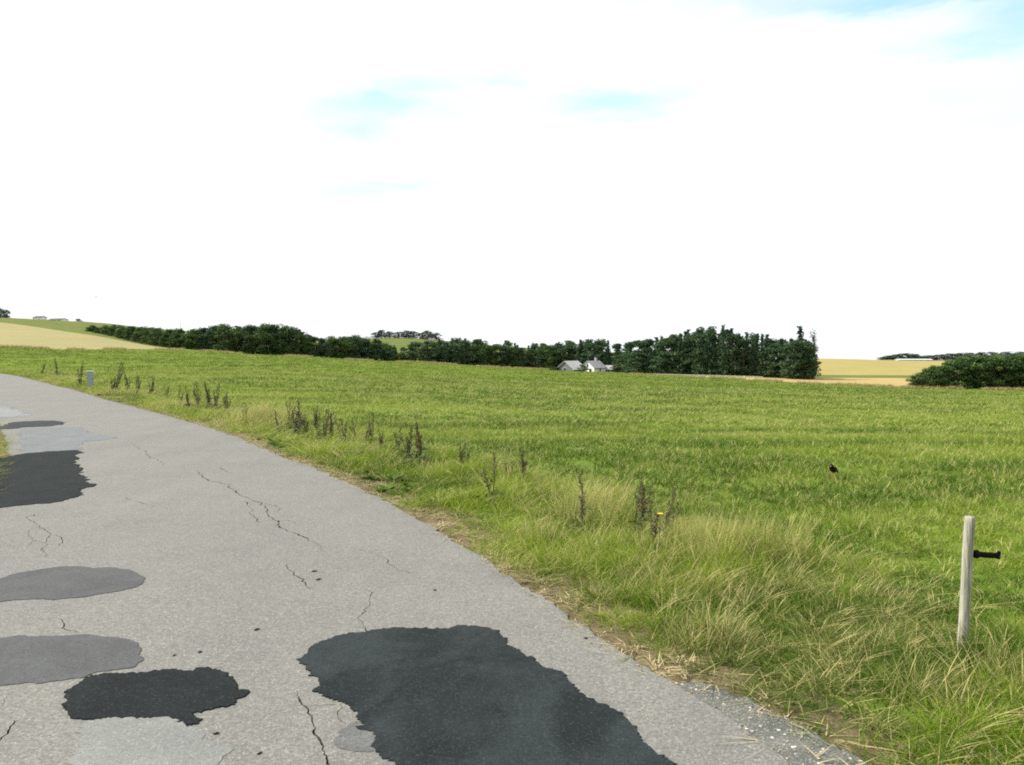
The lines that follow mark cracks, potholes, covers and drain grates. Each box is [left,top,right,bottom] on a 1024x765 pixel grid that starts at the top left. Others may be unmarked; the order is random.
crack [26,514,63,554]
crack [198,468,317,544]
crack [296,690,347,765]
